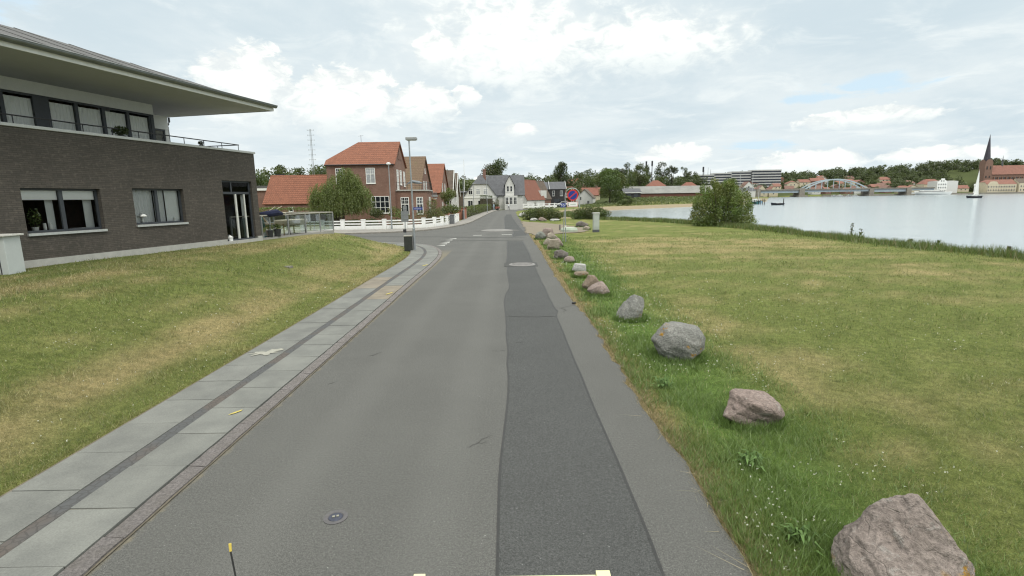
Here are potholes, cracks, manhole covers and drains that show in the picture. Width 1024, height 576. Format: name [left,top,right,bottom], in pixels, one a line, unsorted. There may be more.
utility cover [323,510,348,525]
